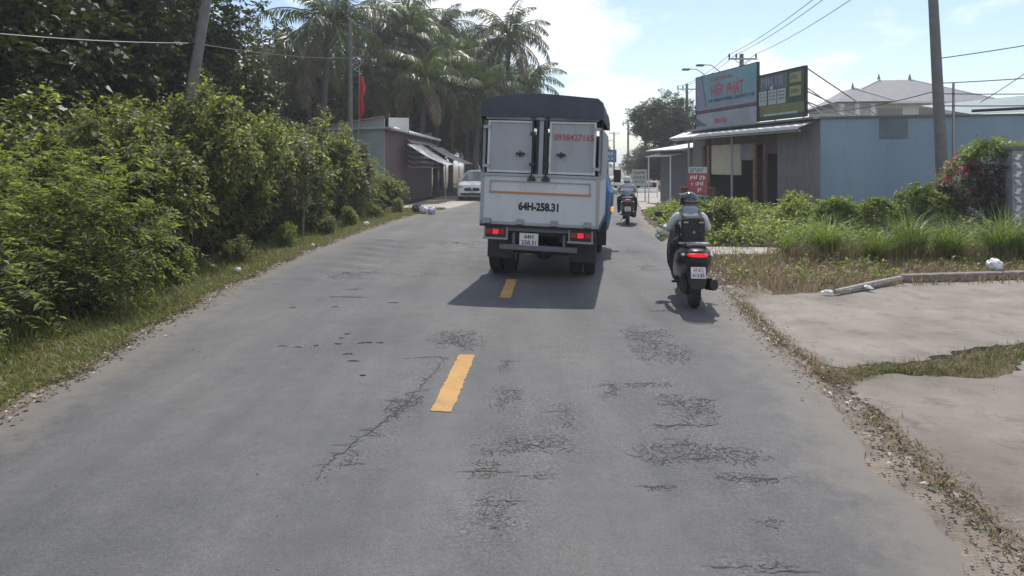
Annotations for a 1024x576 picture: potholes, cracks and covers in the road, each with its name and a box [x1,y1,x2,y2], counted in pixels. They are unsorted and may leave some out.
crack [600,382,787,486]
crack [456,403,582,536]
crack [310,330,483,484]
crack [619,310,694,365]
crack [490,359,525,410]
crack [640,483,676,491]
